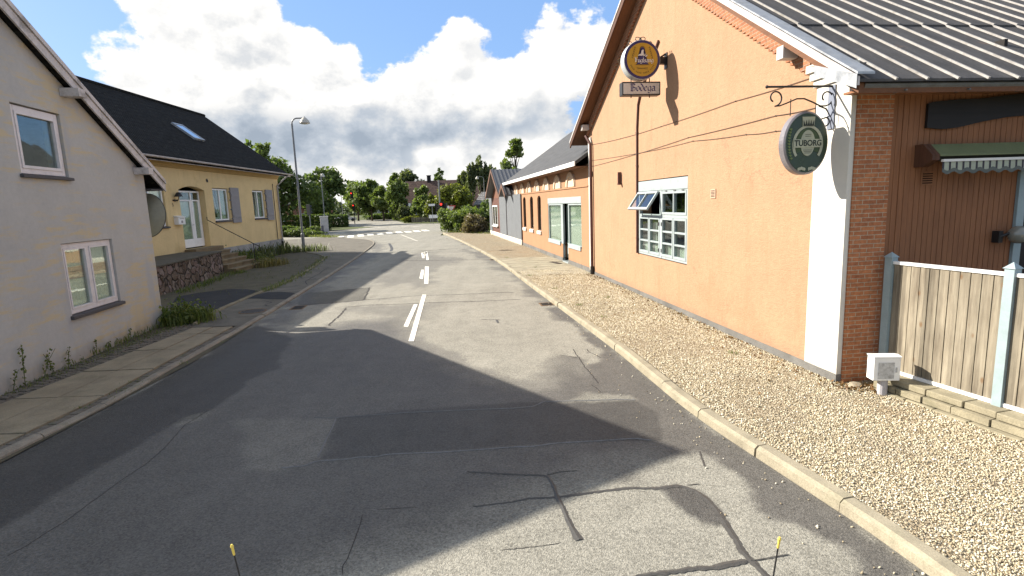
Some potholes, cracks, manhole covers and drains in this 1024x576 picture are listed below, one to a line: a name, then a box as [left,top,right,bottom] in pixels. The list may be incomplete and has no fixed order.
crack [342,507,410,574]
crack [562,349,601,392]
